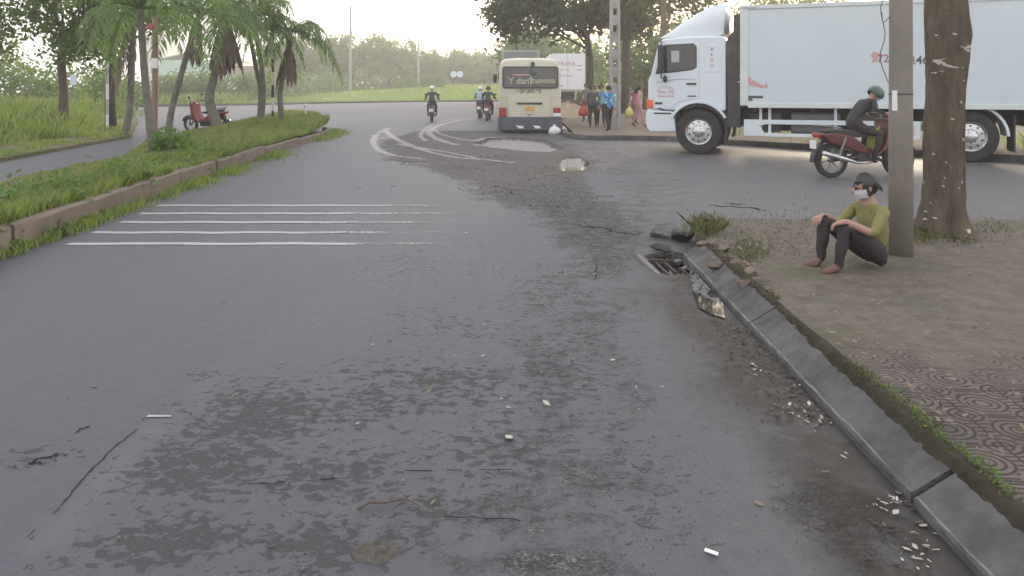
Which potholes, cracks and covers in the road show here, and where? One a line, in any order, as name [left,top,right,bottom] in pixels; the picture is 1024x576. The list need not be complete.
crack [575,224,641,277]
drain grate [636,254,689,275]
pothole [474,137,565,152]
